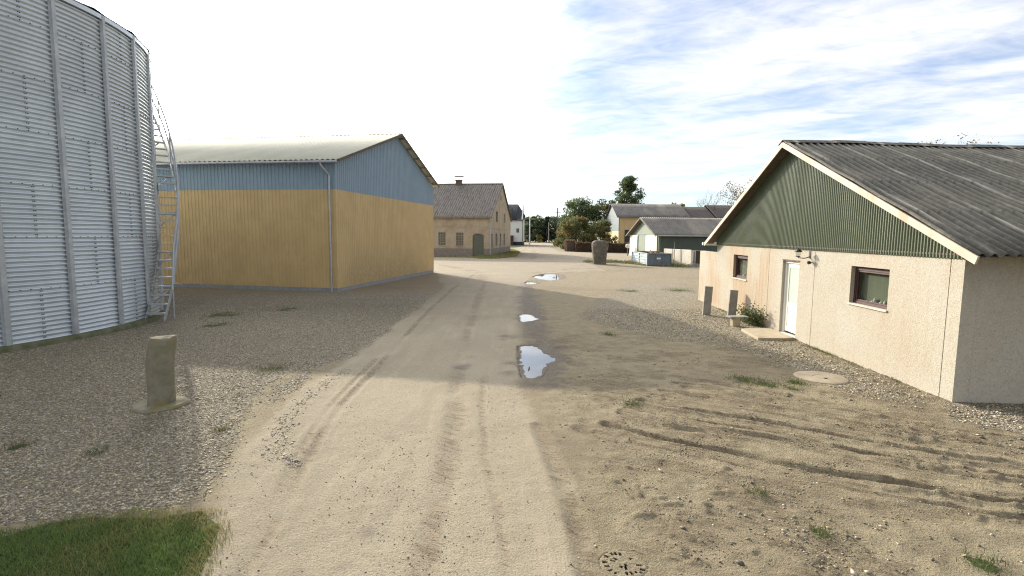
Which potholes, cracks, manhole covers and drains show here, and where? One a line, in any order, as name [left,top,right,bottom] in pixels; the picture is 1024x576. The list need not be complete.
pothole [513,344,566,380]
pothole [516,314,541,322]
manhole cover [793,371,849,384]
